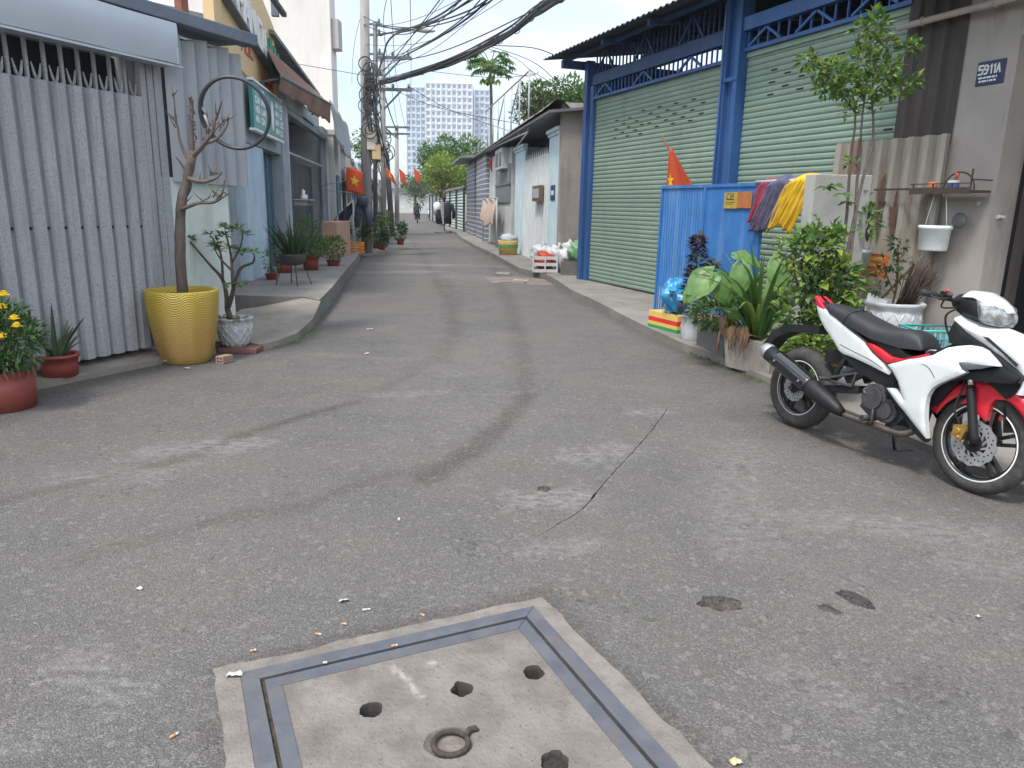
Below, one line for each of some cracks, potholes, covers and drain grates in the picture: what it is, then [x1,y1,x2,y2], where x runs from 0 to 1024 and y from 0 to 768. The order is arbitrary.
pothole [835,590,876,610]
crack [540,409,667,535]
pothole [696,595,742,612]
pothole [817,604,844,615]
manhole cover [213,597,713,768]
